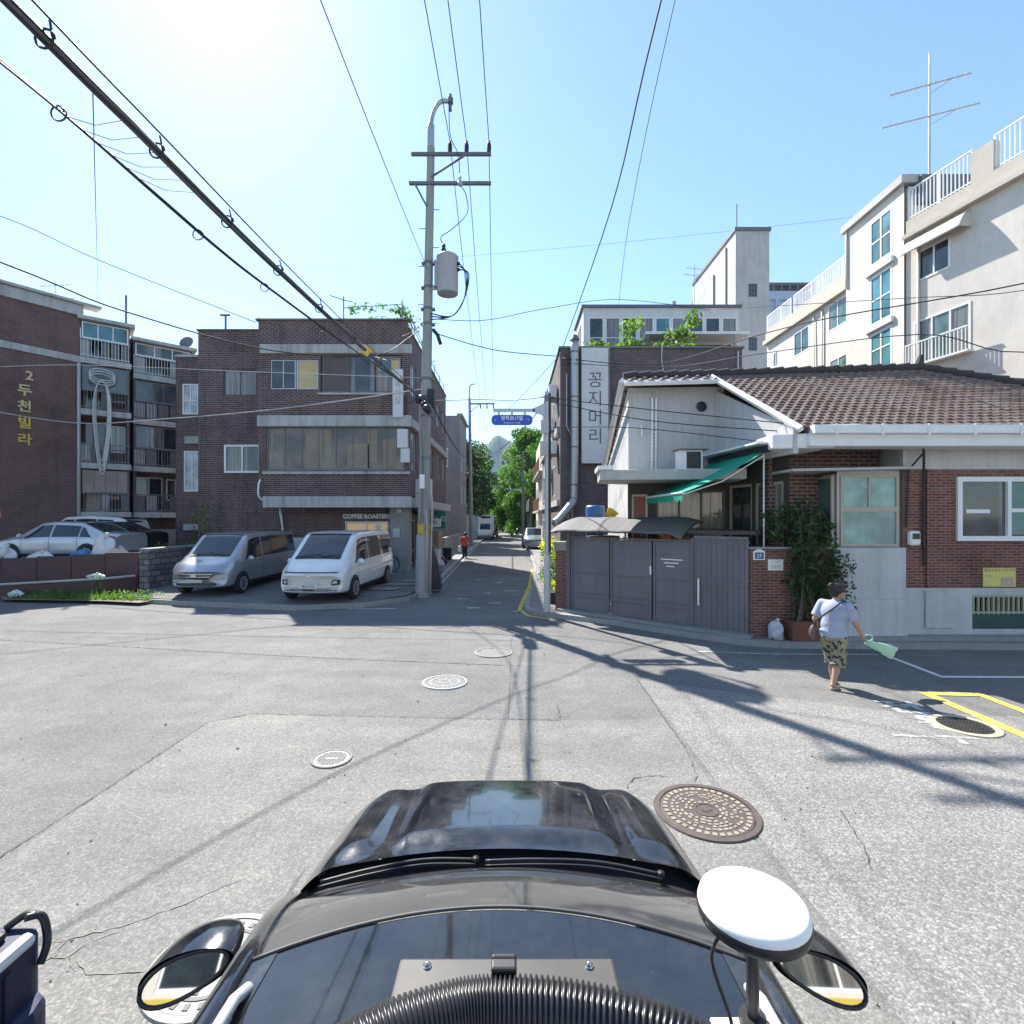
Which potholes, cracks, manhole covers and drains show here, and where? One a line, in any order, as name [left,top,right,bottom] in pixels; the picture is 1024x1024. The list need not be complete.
crack [46,878,241,974]
crack [841,810,873,870]
manhole cover [927,714,1005,738]
manhole cover [474,647,513,658]
manhole cover [421,675,468,690]
manhole cover [653,784,763,844]
